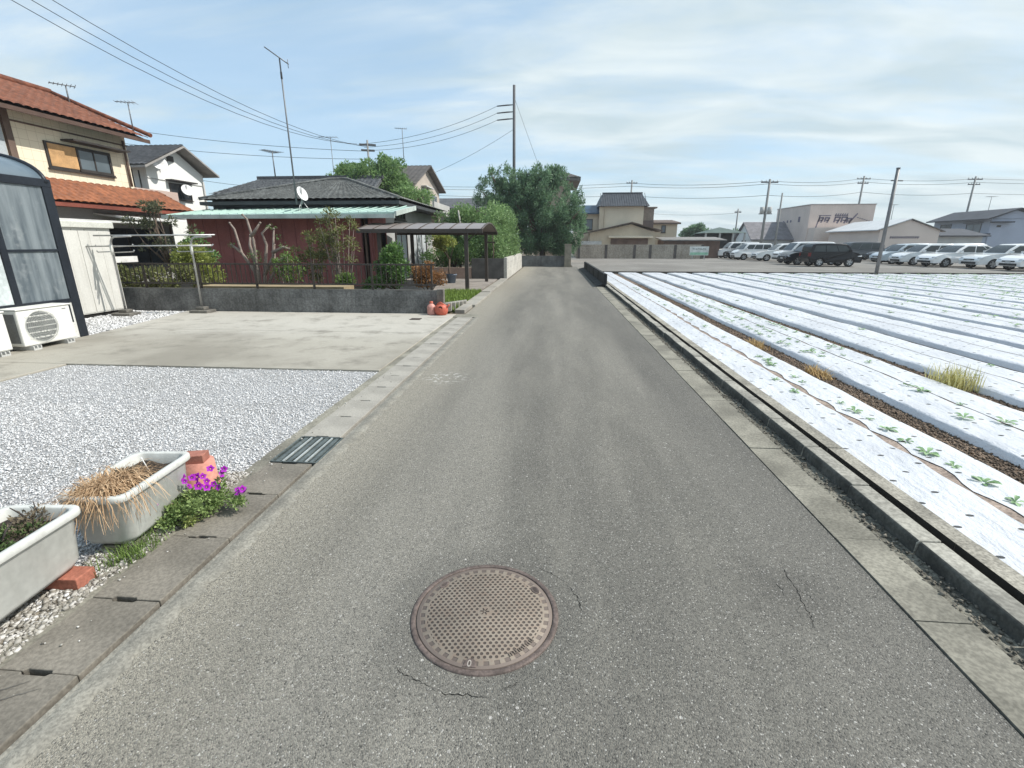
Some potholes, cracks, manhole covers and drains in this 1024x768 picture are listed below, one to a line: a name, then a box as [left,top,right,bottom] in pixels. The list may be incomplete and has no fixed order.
drain grate [270,436,343,466]
manhole cover [410,565,558,677]
crack [775,569,816,629]
crack [396,567,582,698]
